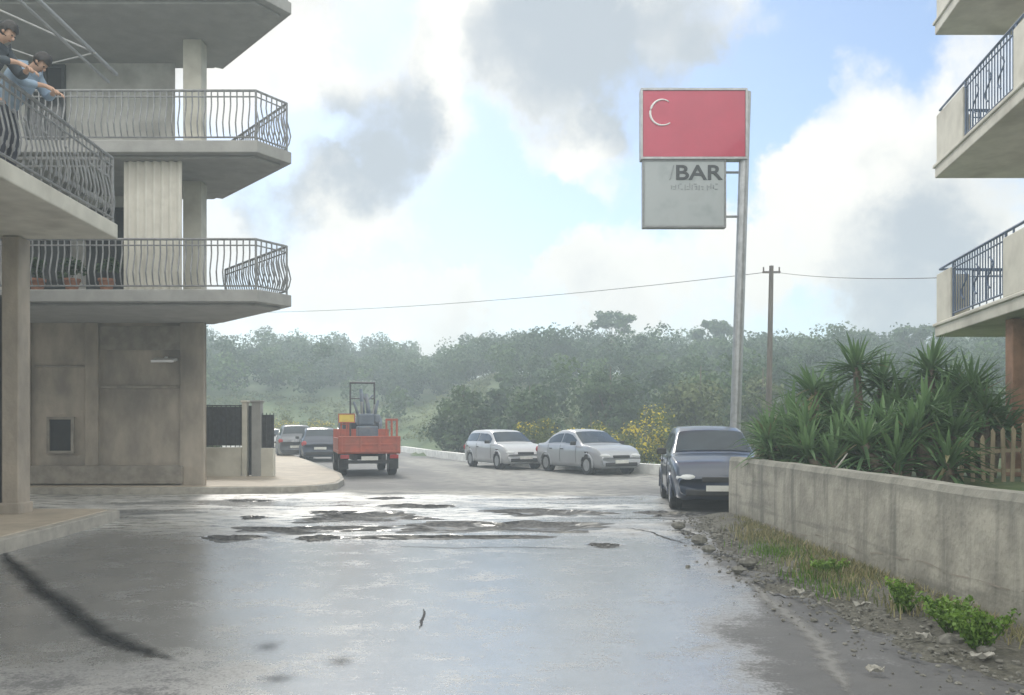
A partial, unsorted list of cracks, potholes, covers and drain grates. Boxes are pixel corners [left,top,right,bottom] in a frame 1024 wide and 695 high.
pothole [291,511,444,523]
pothole [386,520,615,533]
